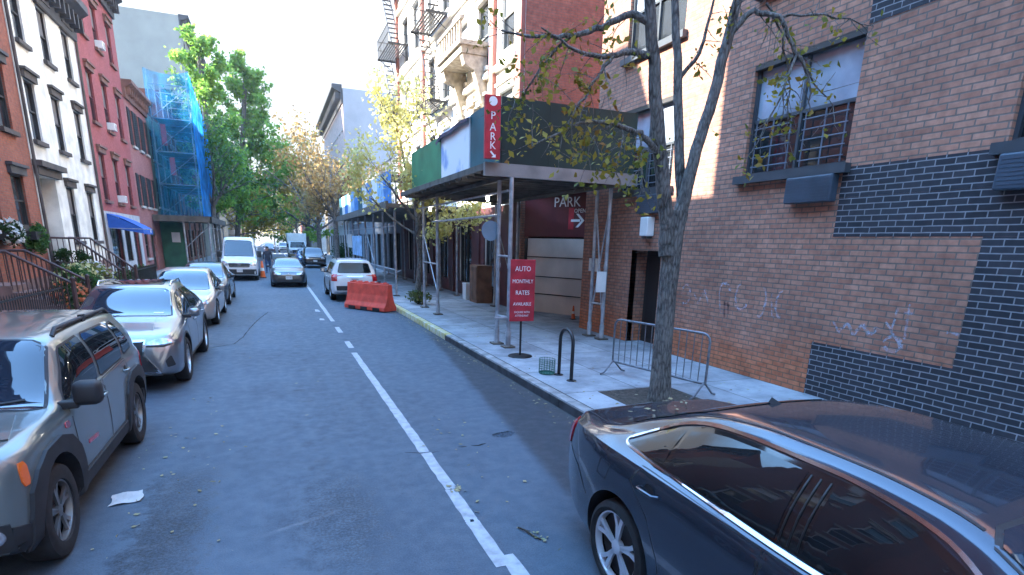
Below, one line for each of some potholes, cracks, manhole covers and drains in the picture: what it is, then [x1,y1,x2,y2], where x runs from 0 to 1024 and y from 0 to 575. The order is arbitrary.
pothole [492,430,515,438]
